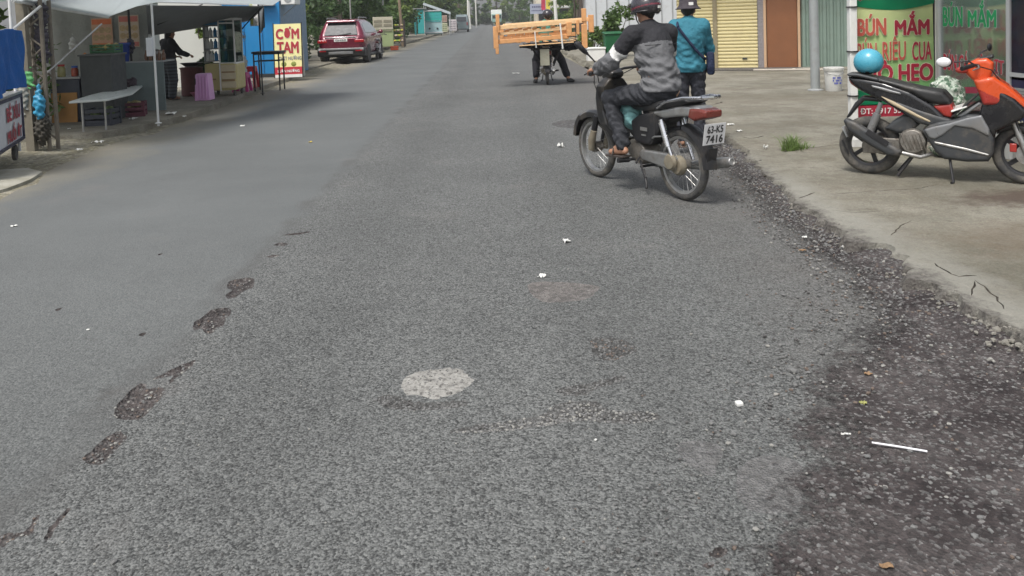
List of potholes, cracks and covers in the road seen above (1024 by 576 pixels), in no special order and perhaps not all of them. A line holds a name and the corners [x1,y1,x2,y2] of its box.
crack [44,508,71,541]
pothole [114,383,165,420]
pothole [226,277,255,299]
crack [935,263,1004,309]
pothole [82,431,127,465]
pothole [193,308,231,334]
